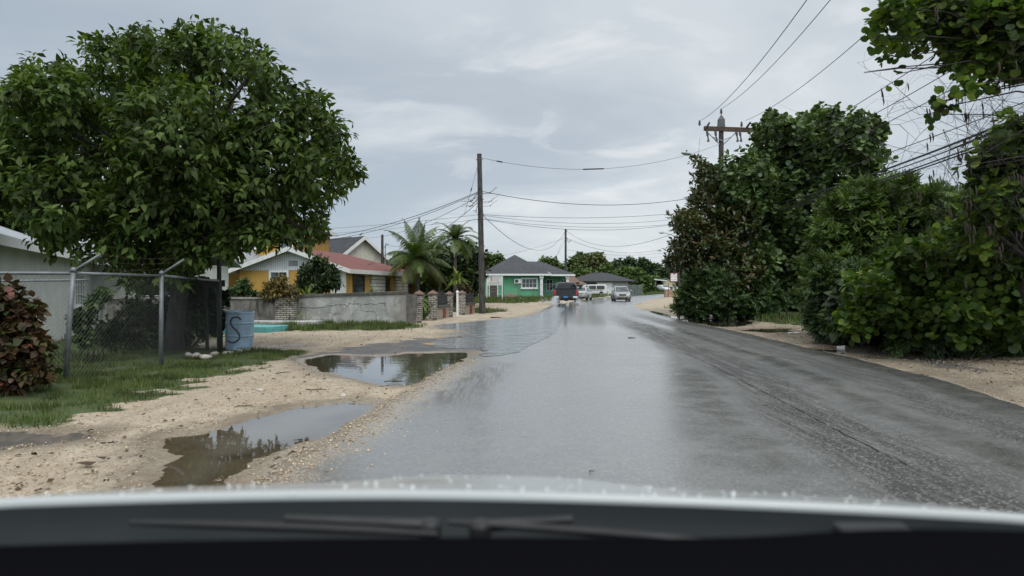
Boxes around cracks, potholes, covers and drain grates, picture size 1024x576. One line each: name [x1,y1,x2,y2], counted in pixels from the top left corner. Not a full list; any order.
pothole [296,351,467,387]
pothole [118,399,388,489]
